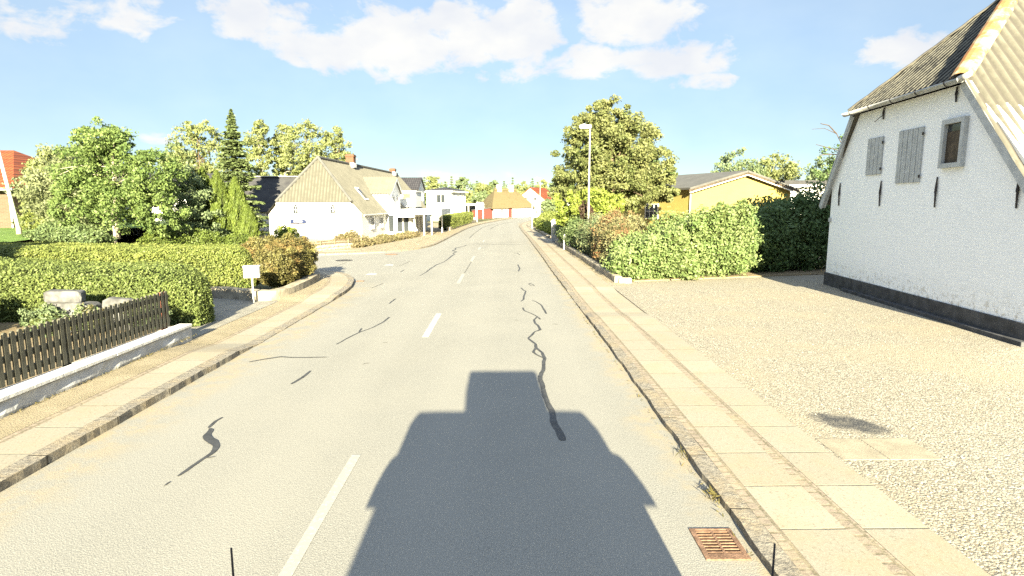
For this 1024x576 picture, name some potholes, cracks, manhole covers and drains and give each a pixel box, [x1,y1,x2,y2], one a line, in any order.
crack [399,222,521,276]
drain grate [689,528,752,561]
